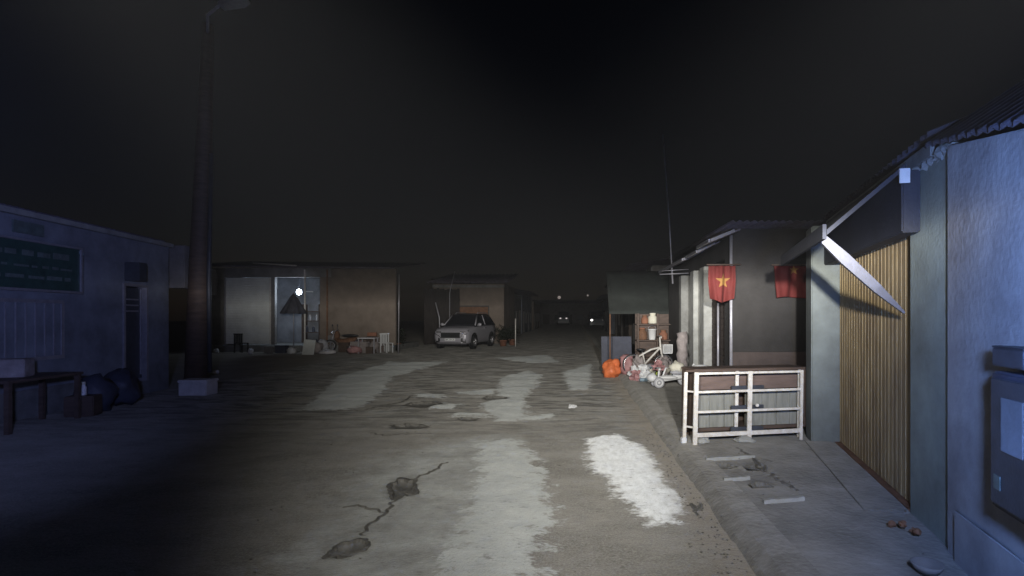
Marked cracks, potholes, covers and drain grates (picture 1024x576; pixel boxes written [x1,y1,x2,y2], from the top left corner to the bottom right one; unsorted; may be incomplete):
pothole [321,538,371,559]
crack [736,447,799,491]
crack [343,462,449,536]
pothole [386,477,419,501]
